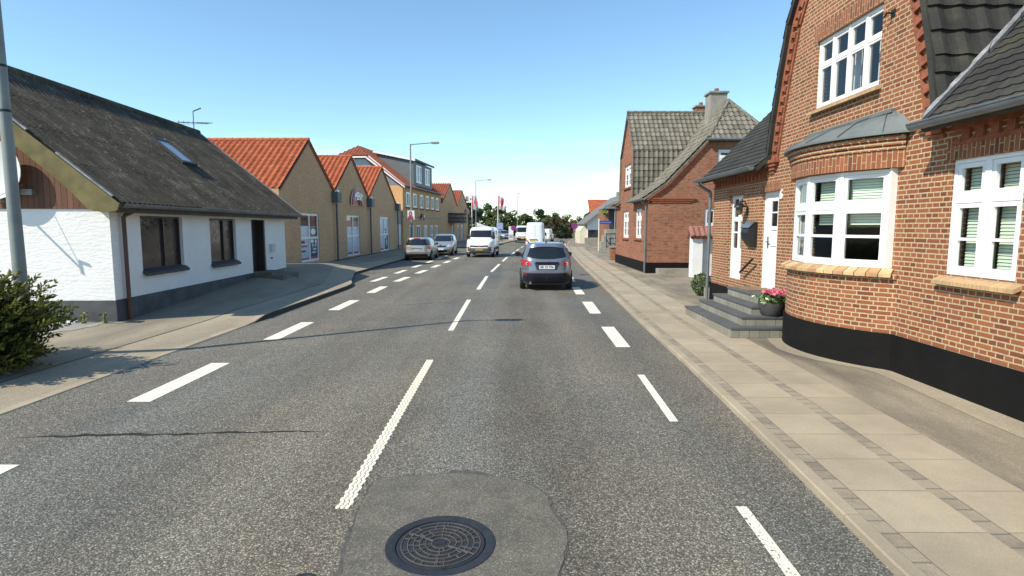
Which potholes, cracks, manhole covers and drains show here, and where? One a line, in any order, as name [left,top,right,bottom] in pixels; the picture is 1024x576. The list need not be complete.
manhole cover [385,516,496,576]
crack [18,430,315,438]
